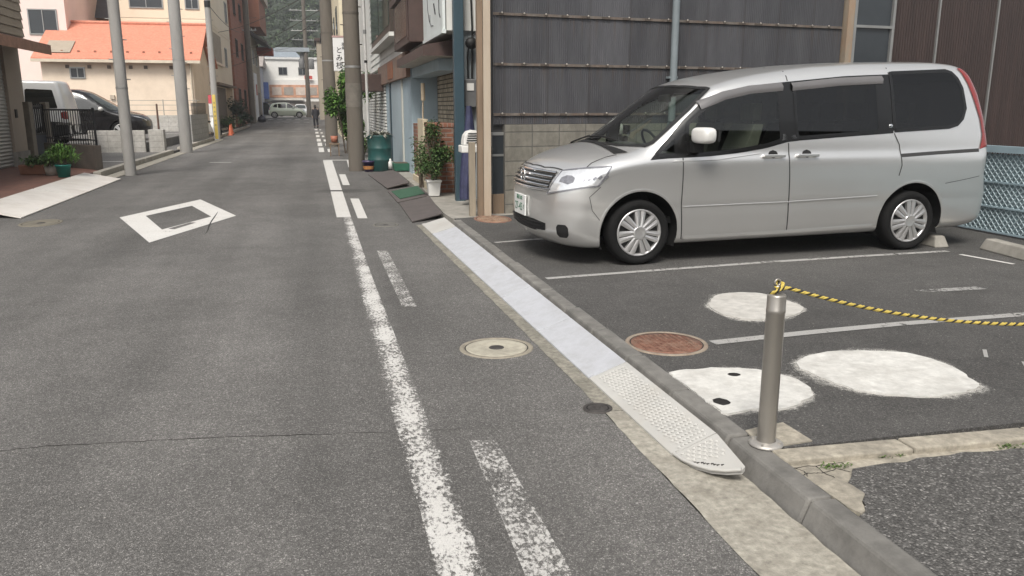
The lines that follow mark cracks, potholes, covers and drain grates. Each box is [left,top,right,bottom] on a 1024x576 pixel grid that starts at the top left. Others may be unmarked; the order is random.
manhole cover [583,403,612,416]
manhole cover [625,331,708,356]
manhole cover [18,219,63,227]
manhole cover [460,337,533,359]
manhole cover [474,215,512,223]
crack [796,462,850,478]
